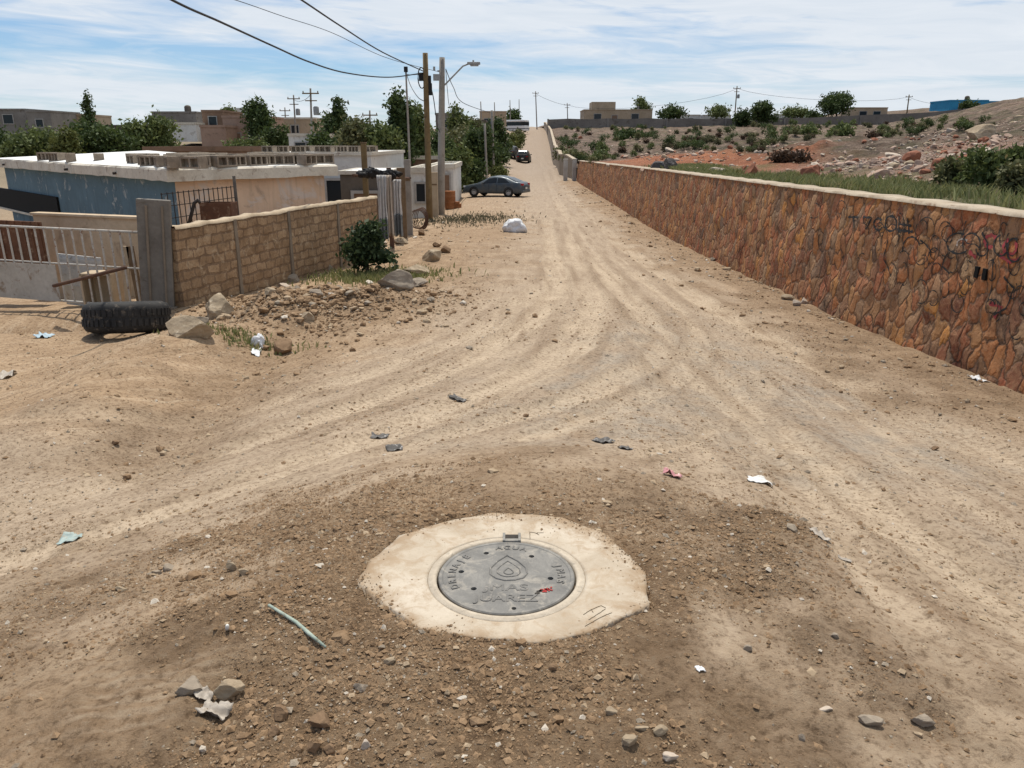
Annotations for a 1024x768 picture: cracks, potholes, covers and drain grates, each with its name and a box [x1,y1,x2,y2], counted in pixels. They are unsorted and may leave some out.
manhole cover [428,533,585,622]
